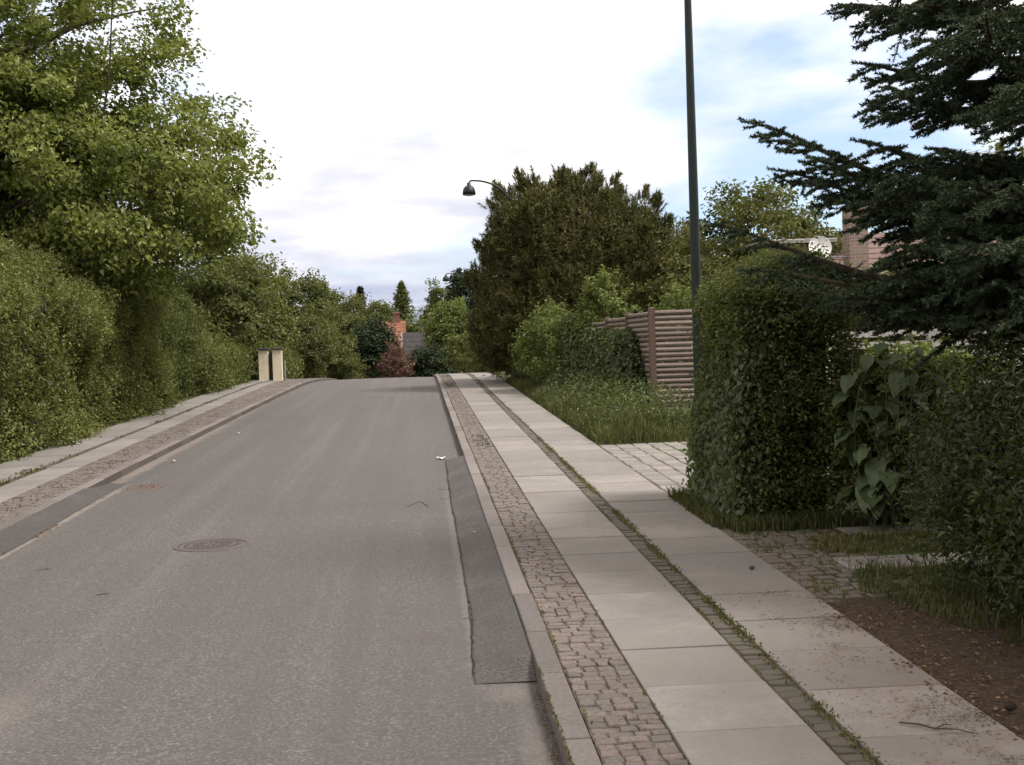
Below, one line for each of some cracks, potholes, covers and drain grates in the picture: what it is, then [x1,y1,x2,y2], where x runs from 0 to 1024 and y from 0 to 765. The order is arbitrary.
manhole cover [173,538,250,552]
